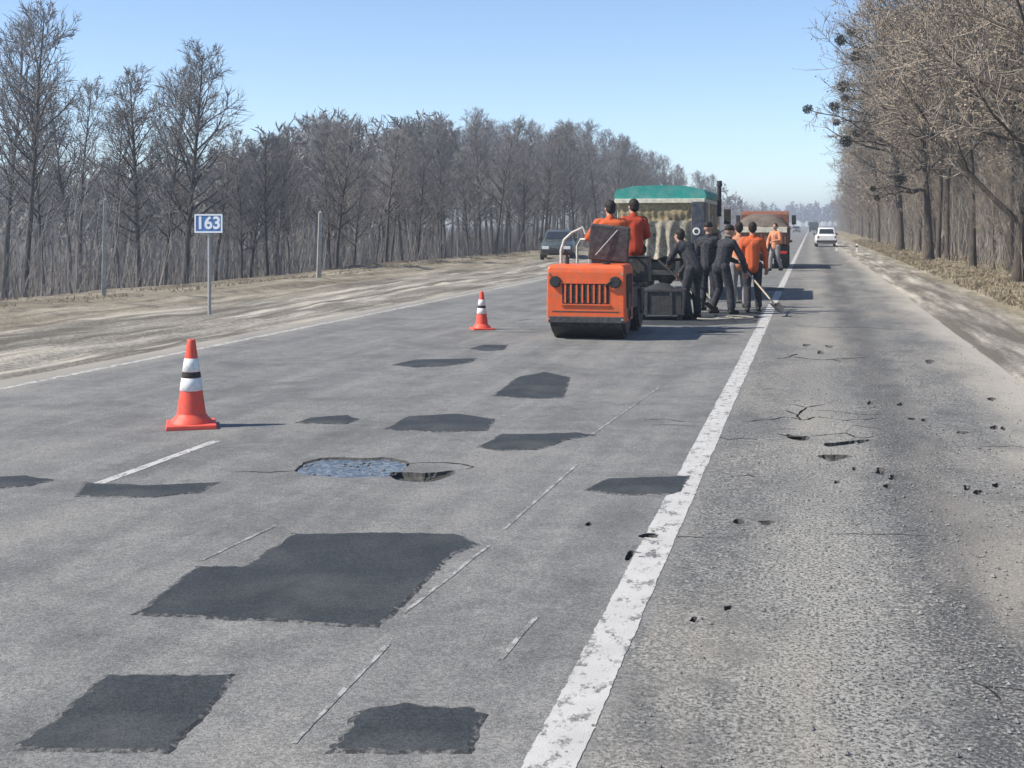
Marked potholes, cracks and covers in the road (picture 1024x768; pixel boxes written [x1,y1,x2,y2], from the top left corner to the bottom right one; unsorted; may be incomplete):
pothole [389,470,456,482]
crack [779,354,866,362]
pothole [294,457,410,478]
crack [720,404,884,440]
